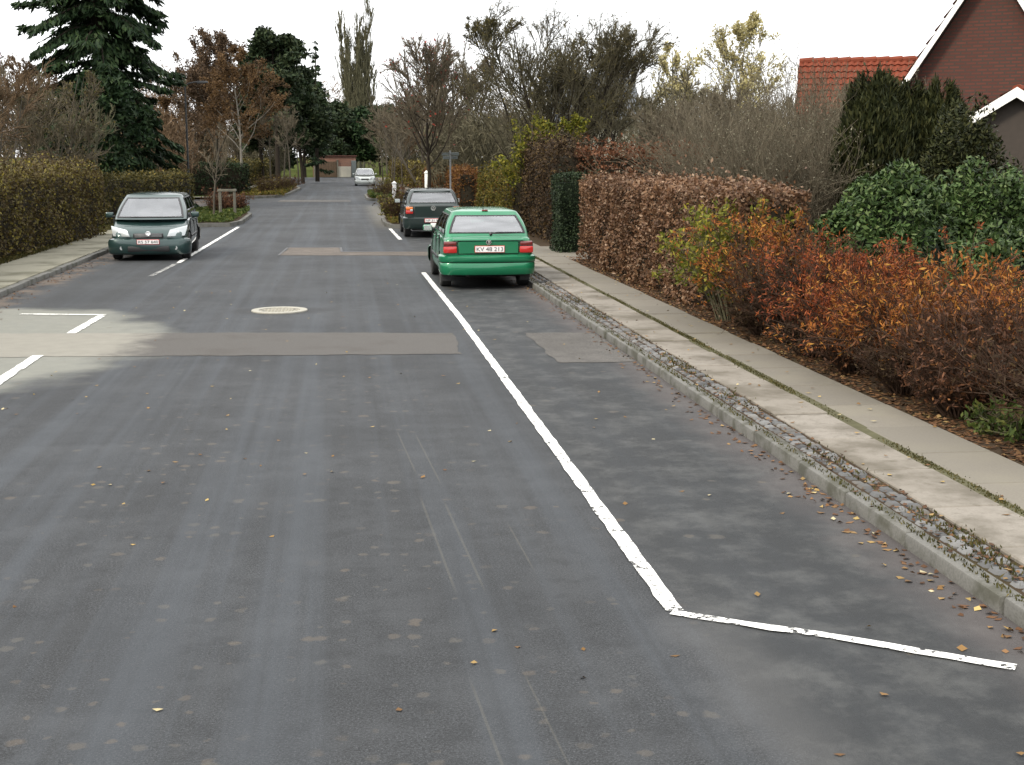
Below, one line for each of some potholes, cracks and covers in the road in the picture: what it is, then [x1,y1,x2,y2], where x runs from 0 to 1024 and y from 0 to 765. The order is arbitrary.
manhole cover [251,306,308,314]
